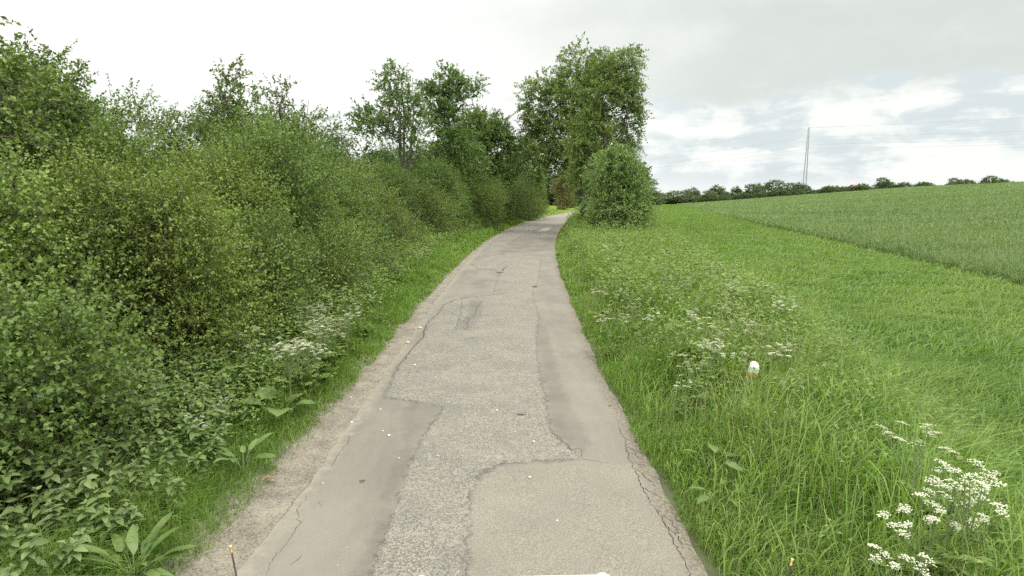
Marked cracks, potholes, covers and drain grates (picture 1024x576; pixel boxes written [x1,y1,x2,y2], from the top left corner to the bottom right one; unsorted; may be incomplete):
crack [435,293,502,341]
crack [616,420,691,576]
